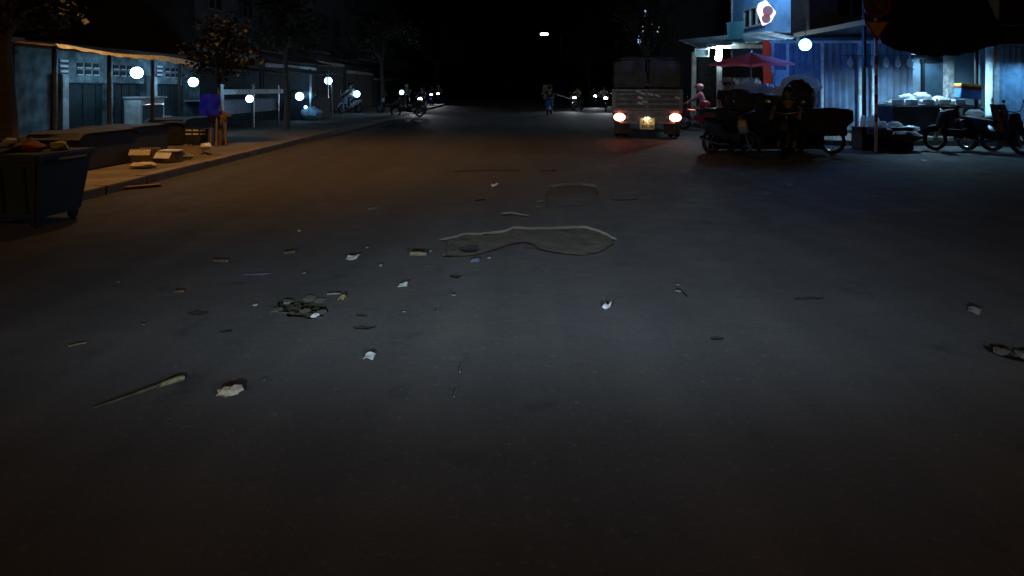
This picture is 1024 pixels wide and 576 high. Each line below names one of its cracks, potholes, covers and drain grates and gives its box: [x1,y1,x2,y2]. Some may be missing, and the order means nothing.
pothole [277,295,329,319]
pothole [979,338,1024,362]
